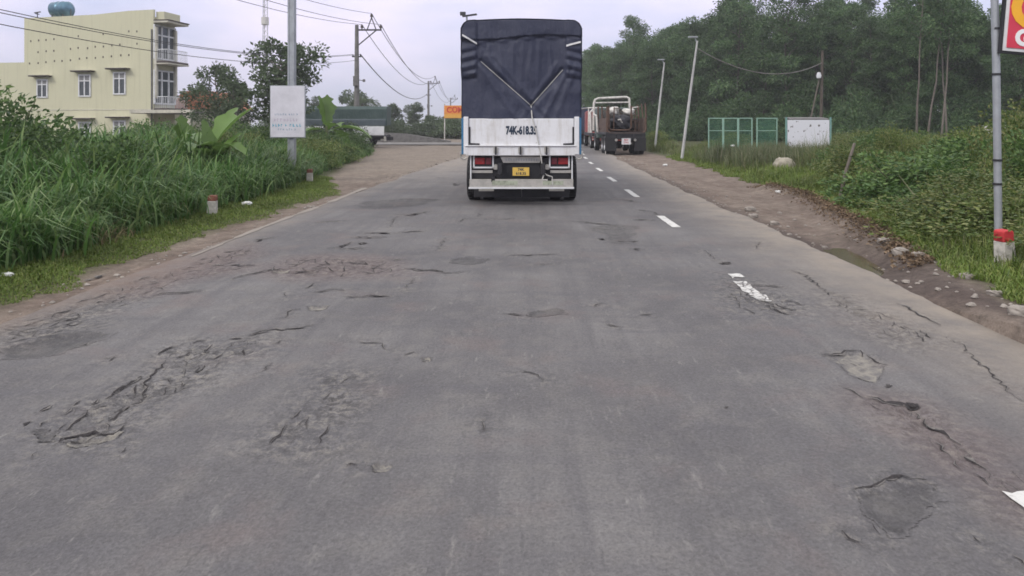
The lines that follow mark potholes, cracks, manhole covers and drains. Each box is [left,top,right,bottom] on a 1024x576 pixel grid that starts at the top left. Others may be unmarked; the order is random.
crack [728,270,1020,399]
pothole [526,308,568,317]
pothole [853,478,948,538]
crack [839,385,1024,491]
pothole [830,352,885,383]
crack [6,211,461,456]
